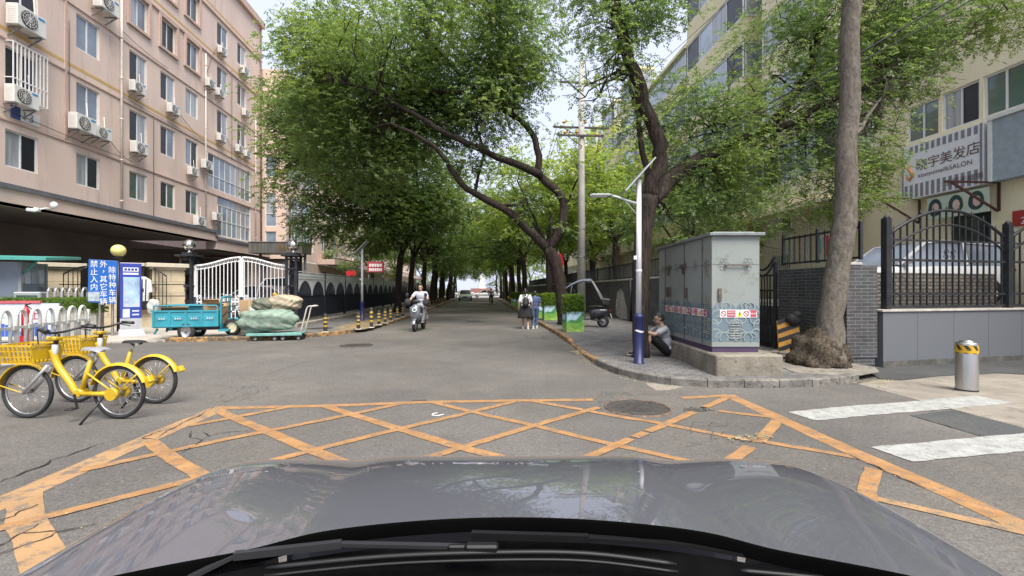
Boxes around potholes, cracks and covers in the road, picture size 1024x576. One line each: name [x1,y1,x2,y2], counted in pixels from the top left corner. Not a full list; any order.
crack [142,407,231,453]
manhole cover [604,399,672,418]
crack [1,442,104,481]
crack [221,357,329,402]
crack [684,418,762,447]
crack [0,504,95,553]
